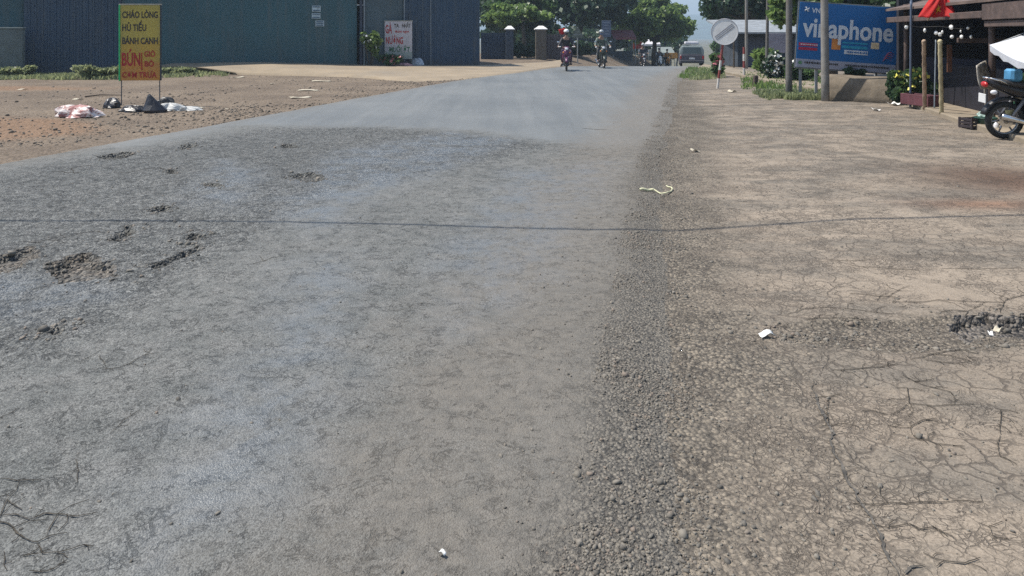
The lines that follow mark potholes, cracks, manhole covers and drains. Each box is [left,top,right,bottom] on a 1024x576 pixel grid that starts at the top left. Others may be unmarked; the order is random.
crack [813,336,997,450]
pothole [139,244,202,270]
pothole [288,172,327,182]
pothole [0,245,46,274]
crack [853,488,987,571]
pothole [146,205,175,214]
crack [0,478,98,572]
crack [789,259,1024,322]
pothole [946,312,1024,343]
pothole [104,225,138,242]
pothole [98,151,136,159]
crack [994,407,1018,465]
